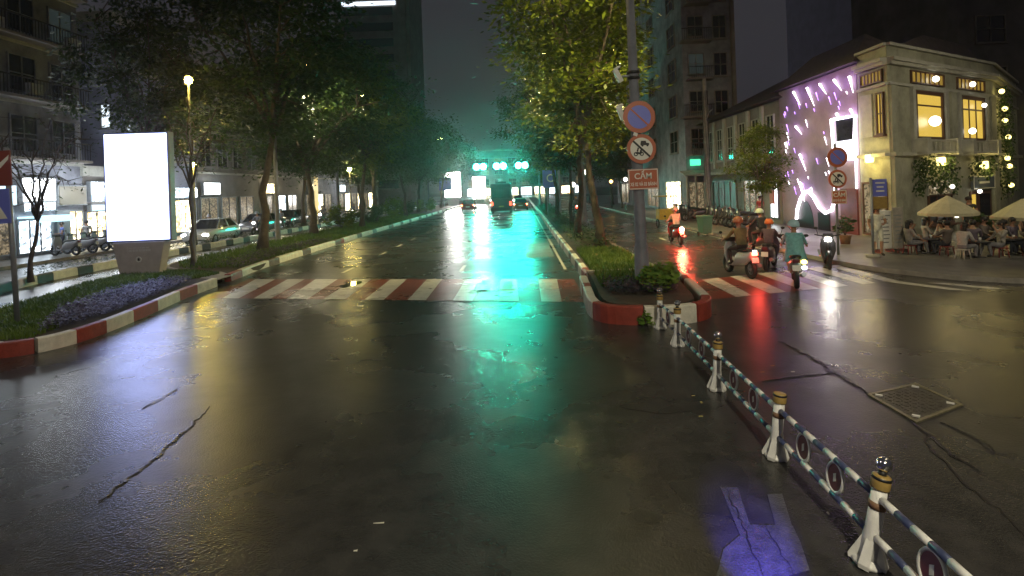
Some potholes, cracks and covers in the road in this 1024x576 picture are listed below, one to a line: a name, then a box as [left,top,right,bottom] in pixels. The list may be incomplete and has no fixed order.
crack [765,341,867,393]
crack [725,487,793,576]
crack [142,389,177,409]
